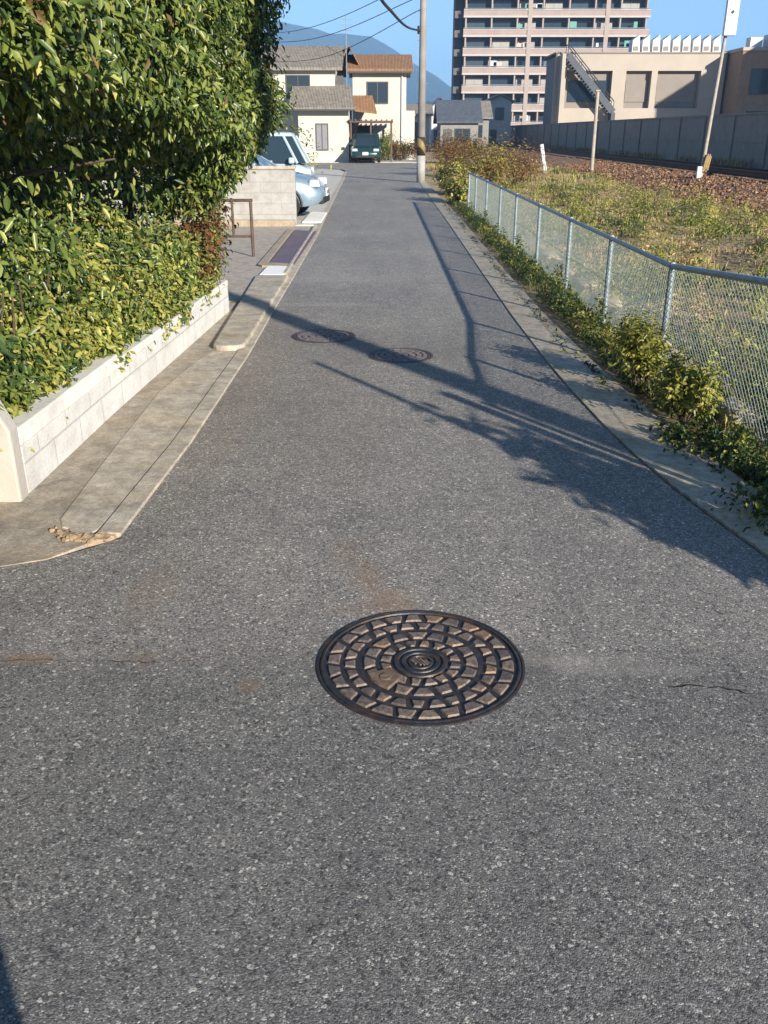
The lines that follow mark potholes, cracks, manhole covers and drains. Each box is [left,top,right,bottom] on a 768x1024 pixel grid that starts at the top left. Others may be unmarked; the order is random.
manhole cover [368,348,433,363]
manhole cover [291,329,356,343]
manhole cover [316,610,525,727]
crack [666,684,765,694]
